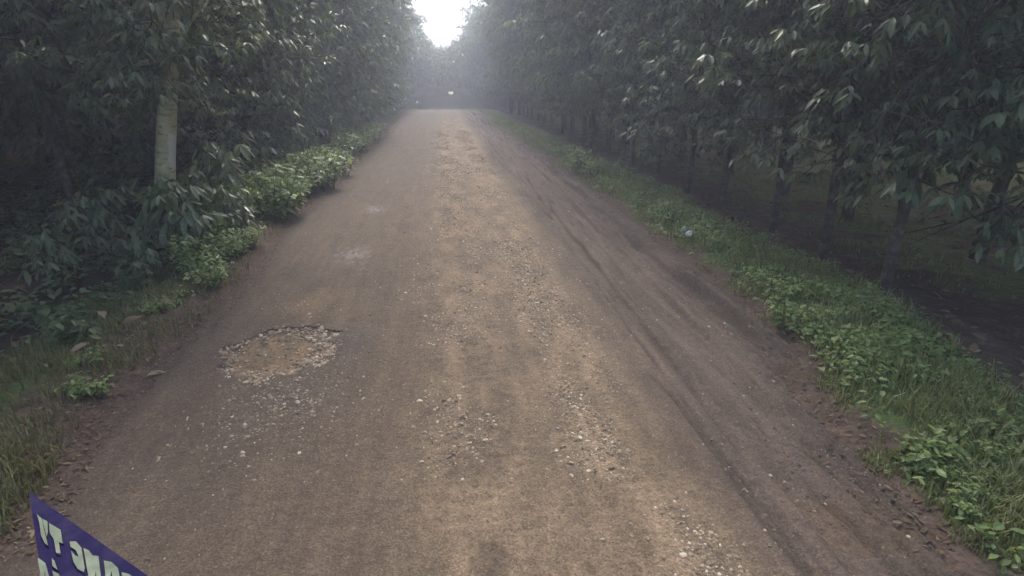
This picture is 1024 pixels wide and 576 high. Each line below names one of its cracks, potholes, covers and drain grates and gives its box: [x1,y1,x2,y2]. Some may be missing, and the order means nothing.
pothole [213,325,343,385]
